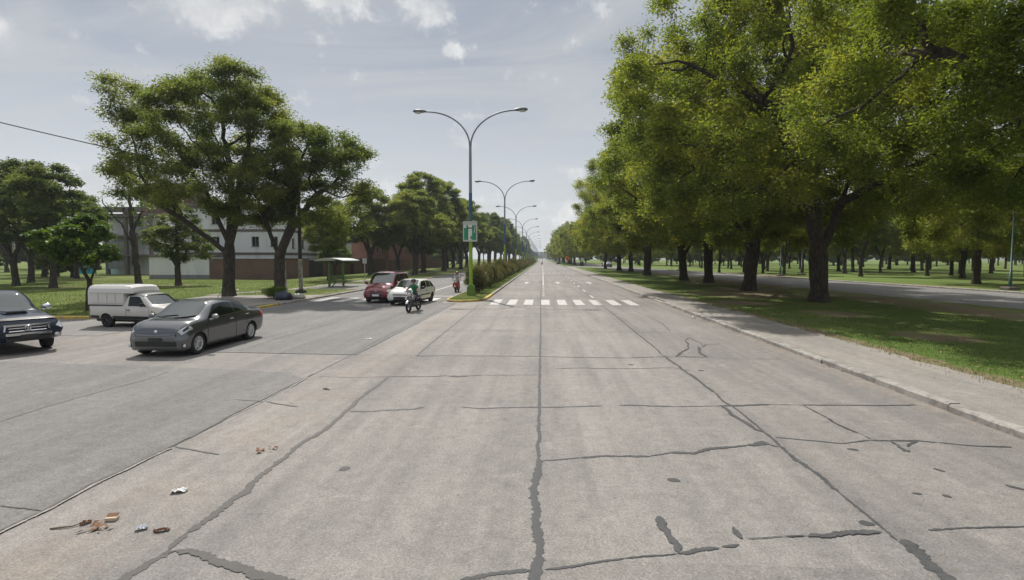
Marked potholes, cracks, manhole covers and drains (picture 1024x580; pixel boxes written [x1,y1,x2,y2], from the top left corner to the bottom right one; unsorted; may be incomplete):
crack [0,311,478,533]
crack [460,516,882,580]
